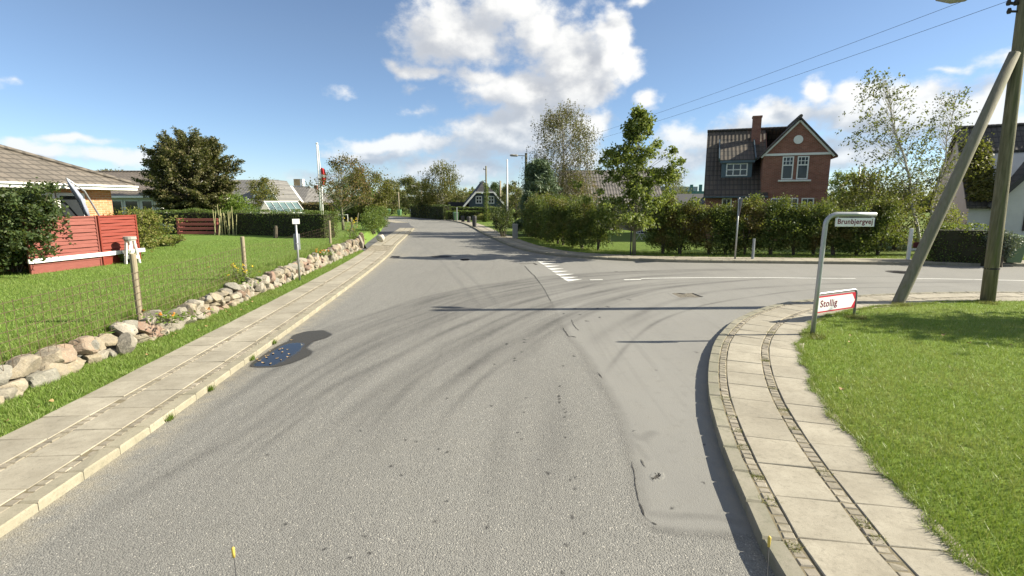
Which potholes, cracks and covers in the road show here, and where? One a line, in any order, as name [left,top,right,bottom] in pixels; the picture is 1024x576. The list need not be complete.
crack [632,460,657,525]
pothole [649,472,666,482]
